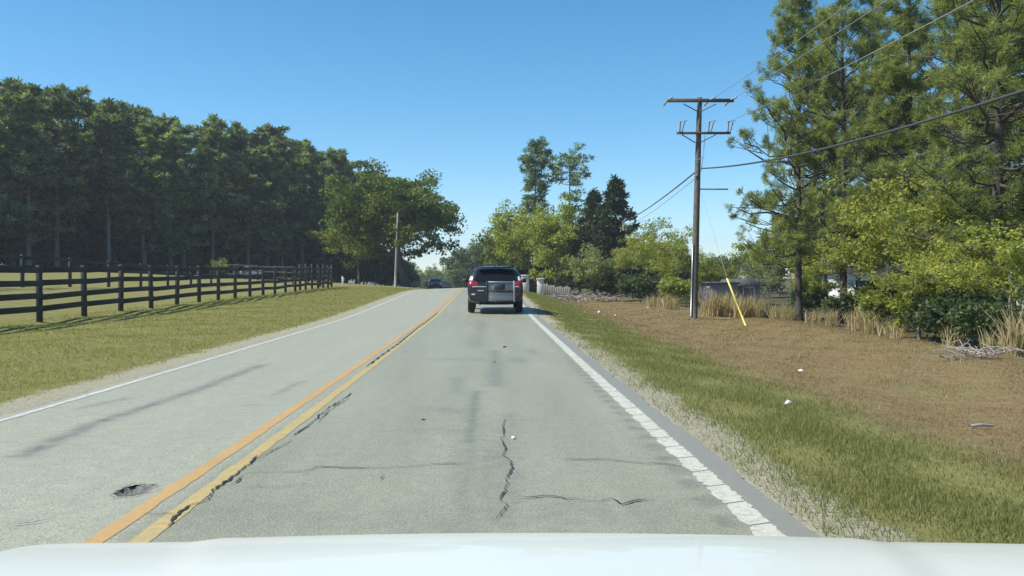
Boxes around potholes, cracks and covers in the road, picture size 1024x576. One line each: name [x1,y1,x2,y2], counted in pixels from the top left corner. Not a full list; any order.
pothole [109,482,163,498]
crack [148,393,680,526]
